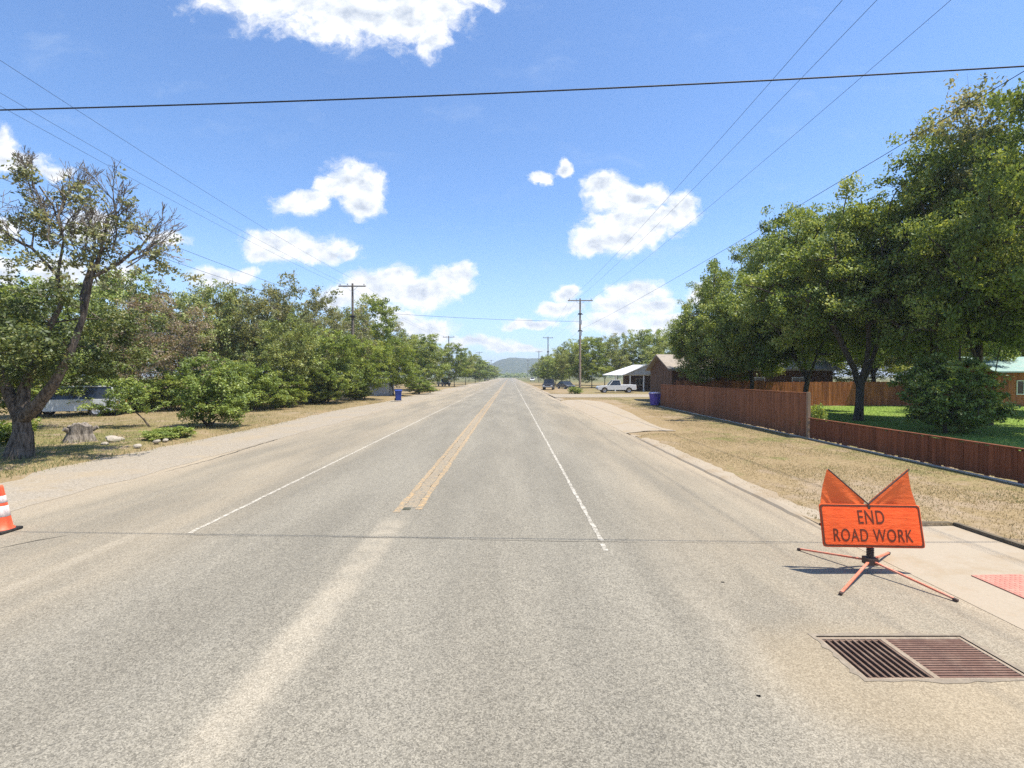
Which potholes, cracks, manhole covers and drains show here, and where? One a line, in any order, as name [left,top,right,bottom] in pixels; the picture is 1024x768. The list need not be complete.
drain grate [808,632,1024,684]
